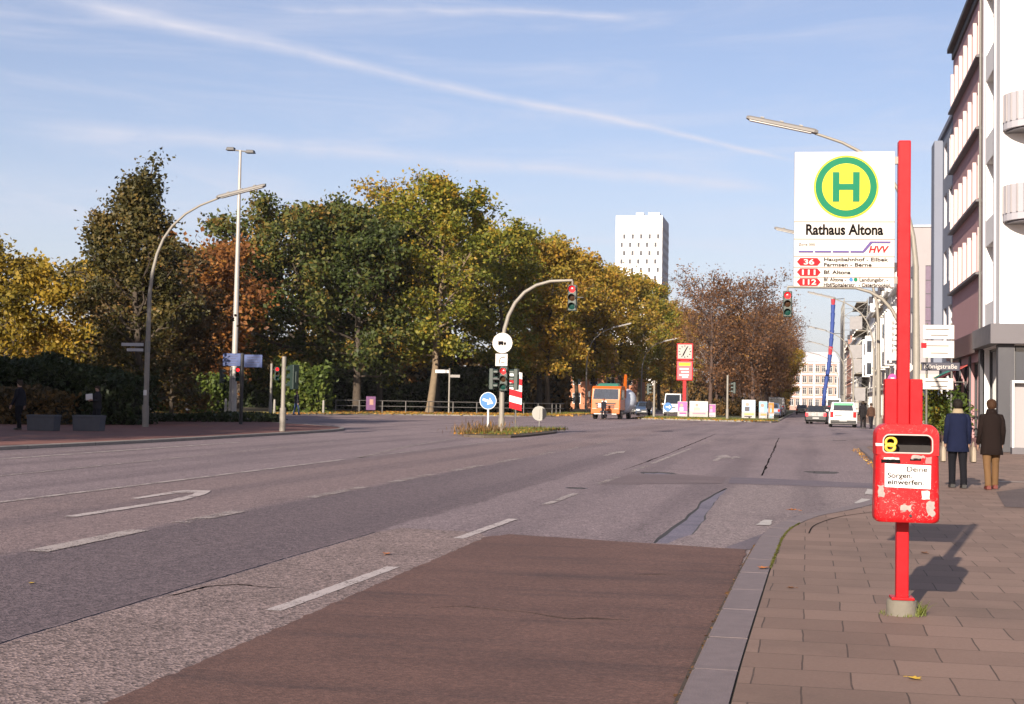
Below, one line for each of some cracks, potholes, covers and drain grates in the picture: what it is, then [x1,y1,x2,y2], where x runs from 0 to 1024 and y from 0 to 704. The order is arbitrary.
crack [171,584,276,596]
crack [431,606,619,620]
